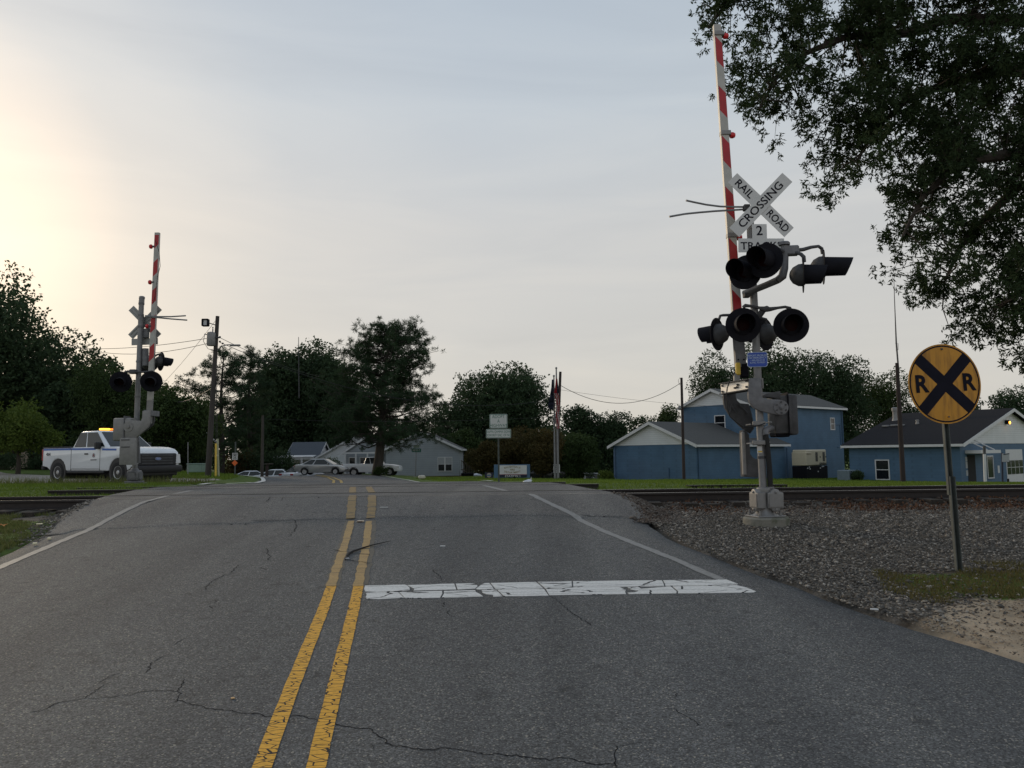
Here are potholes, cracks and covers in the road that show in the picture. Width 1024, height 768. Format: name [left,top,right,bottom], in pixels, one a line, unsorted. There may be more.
crack [33,673,635,766]
